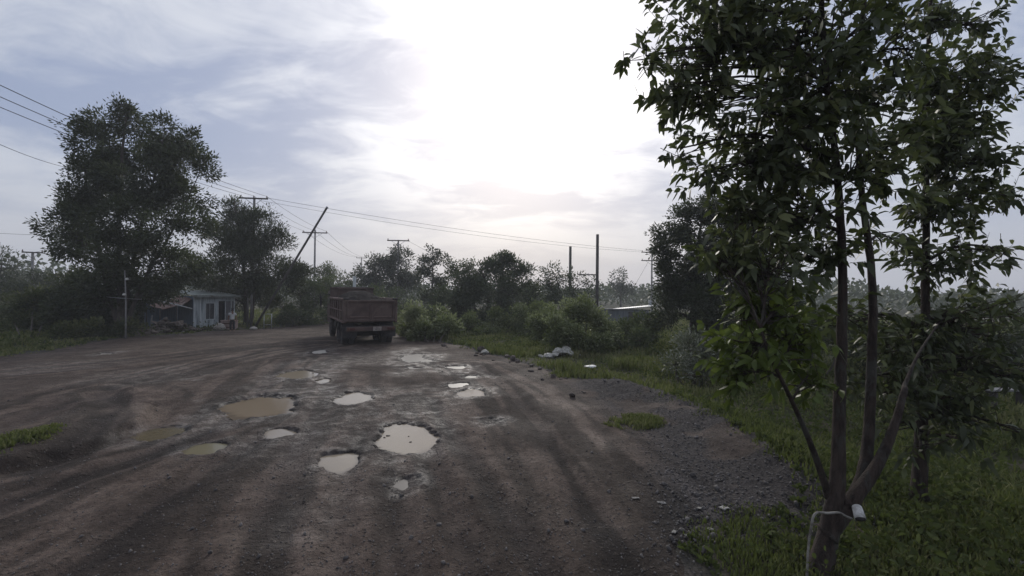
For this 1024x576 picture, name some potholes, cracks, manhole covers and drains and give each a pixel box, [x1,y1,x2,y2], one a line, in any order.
pothole [448,386,493,399]
pothole [193,390,316,426]
pothole [384,352,446,367]
pothole [441,381,475,389]
pothole [354,416,458,463]
pothole [257,425,305,442]
pothole [115,422,204,445]
pothole [322,389,383,408]
pothole [265,368,326,381]
pothole [386,470,431,495]
pothole [171,438,240,458]
pothole [304,446,370,478]
